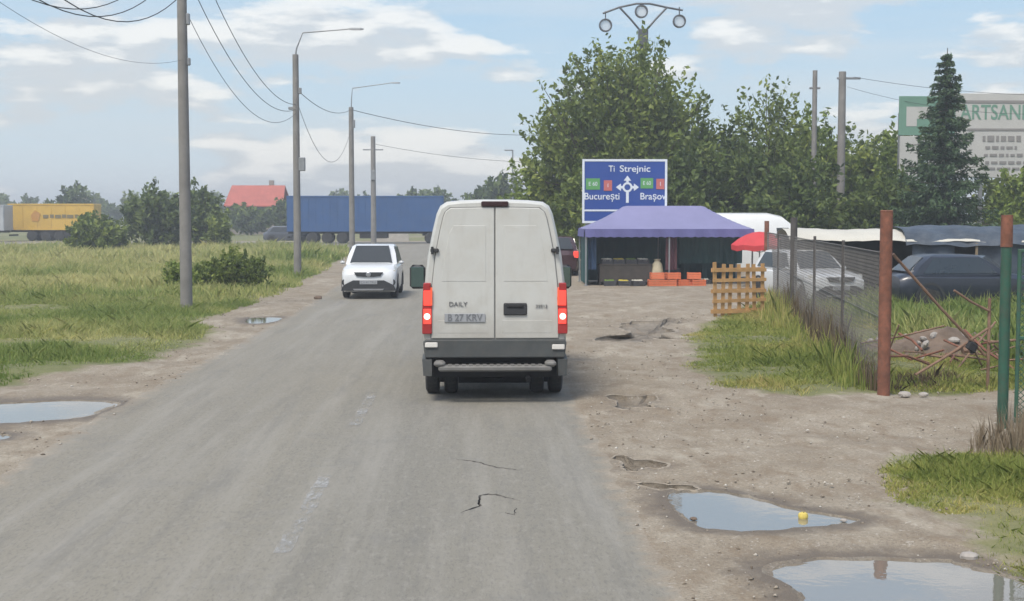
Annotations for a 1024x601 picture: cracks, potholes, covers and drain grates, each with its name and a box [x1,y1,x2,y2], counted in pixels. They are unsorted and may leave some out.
pothole [633,482,701,492]
pothole [592,317,683,343]
pothole [605,394,660,410]
pothole [665,489,860,531]
pothole [610,454,671,472]
pothole [762,556,1024,601]
crack [463,493,521,515]
